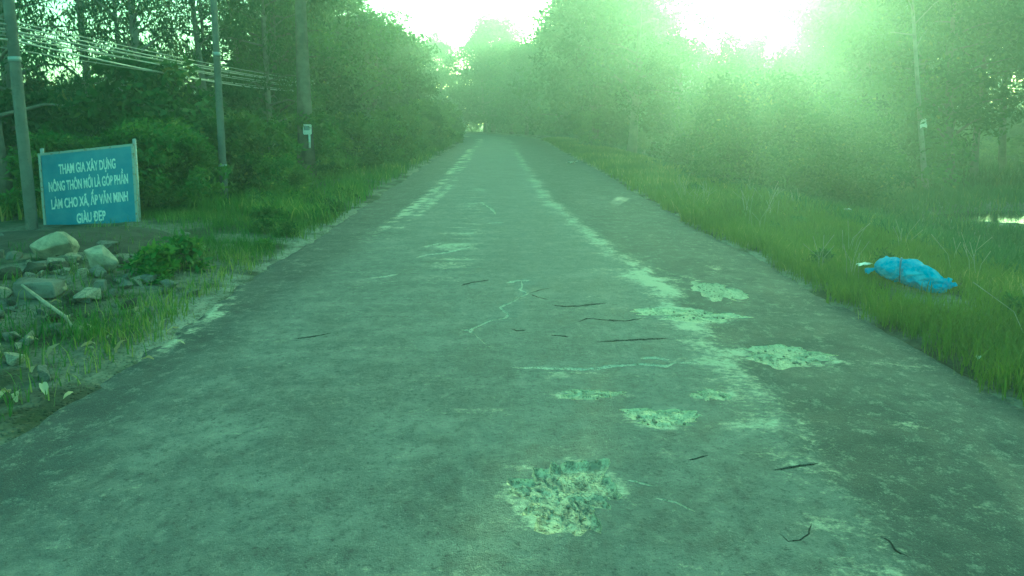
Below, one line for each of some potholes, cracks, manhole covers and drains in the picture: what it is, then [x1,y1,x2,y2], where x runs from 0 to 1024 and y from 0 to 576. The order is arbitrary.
crack [461,280,710,371]
pothole [506,458,622,536]
crack [779,523,812,542]
crack [880,536,906,556]
